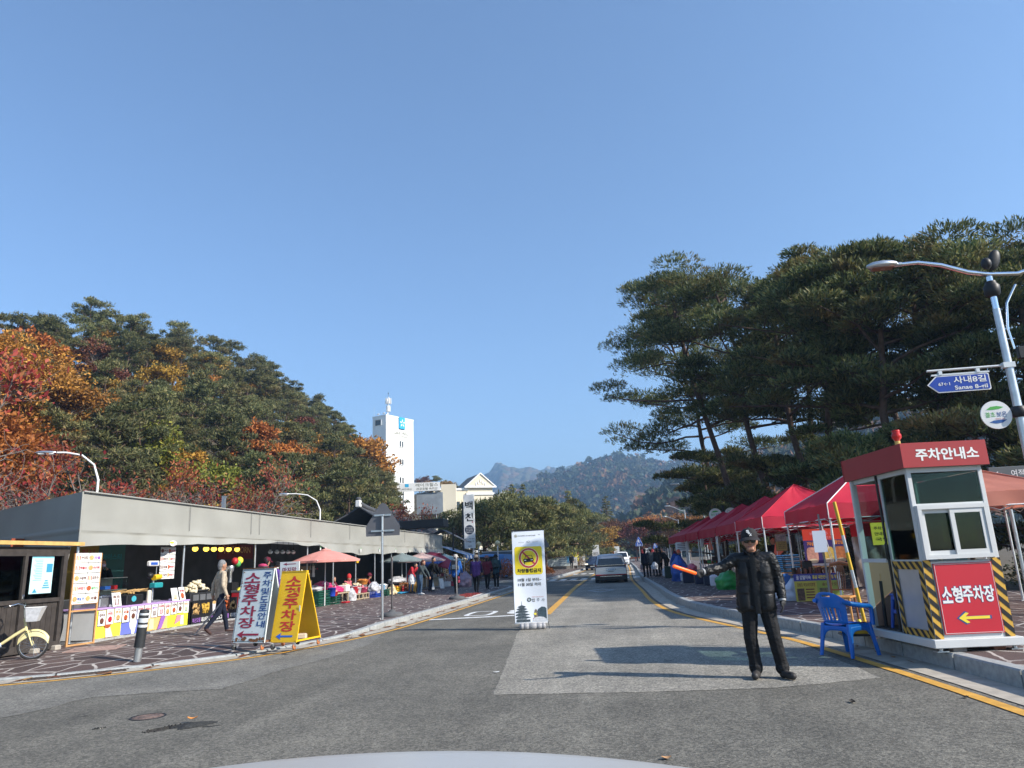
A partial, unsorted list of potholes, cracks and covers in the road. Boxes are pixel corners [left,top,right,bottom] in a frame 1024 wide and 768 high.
manhole cover [128,713,167,721]
